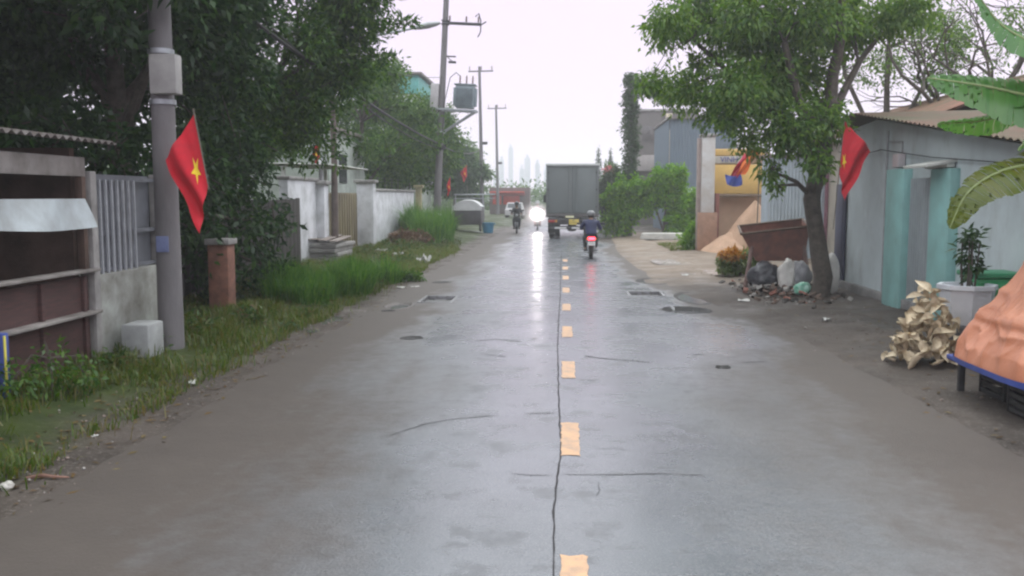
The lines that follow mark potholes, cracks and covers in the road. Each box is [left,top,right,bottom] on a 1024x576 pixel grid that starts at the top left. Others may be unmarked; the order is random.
crack [573,473,700,497]
crack [389,415,492,436]
